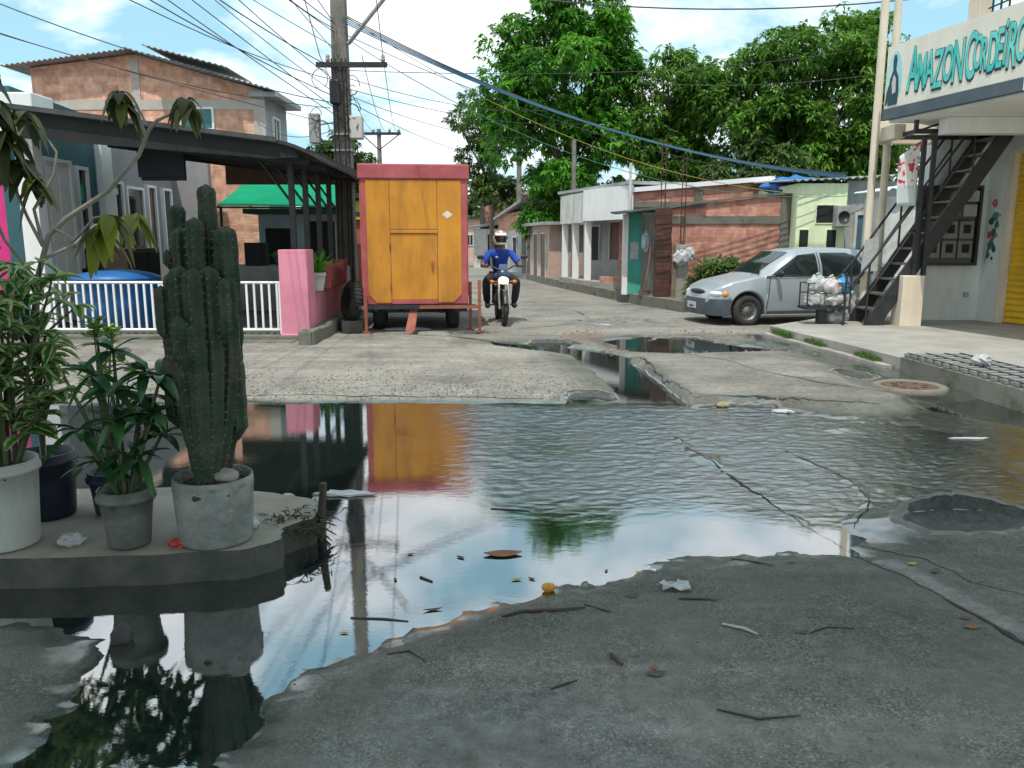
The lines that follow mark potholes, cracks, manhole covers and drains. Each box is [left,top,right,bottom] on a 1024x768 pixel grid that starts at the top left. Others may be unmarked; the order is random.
crack [855,546,1024,644]
pothole [524,339,589,348]
manhole cover [872,379,949,394]
crack [779,448,871,527]
crack [639,353,886,404]
pothole [648,335,720,343]
pothole [559,388,620,404]
